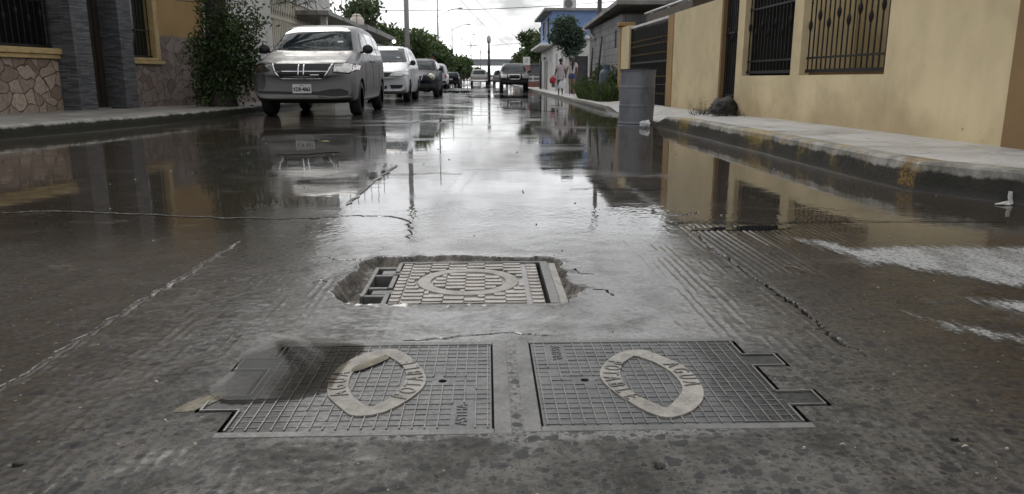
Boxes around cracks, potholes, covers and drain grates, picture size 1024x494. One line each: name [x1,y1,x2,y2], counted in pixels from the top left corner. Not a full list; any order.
manhole cover [515,338,828,432]
manhole cover [359,261,569,306]
manhole cover [198,341,512,438]
crack [652,211,867,357]
